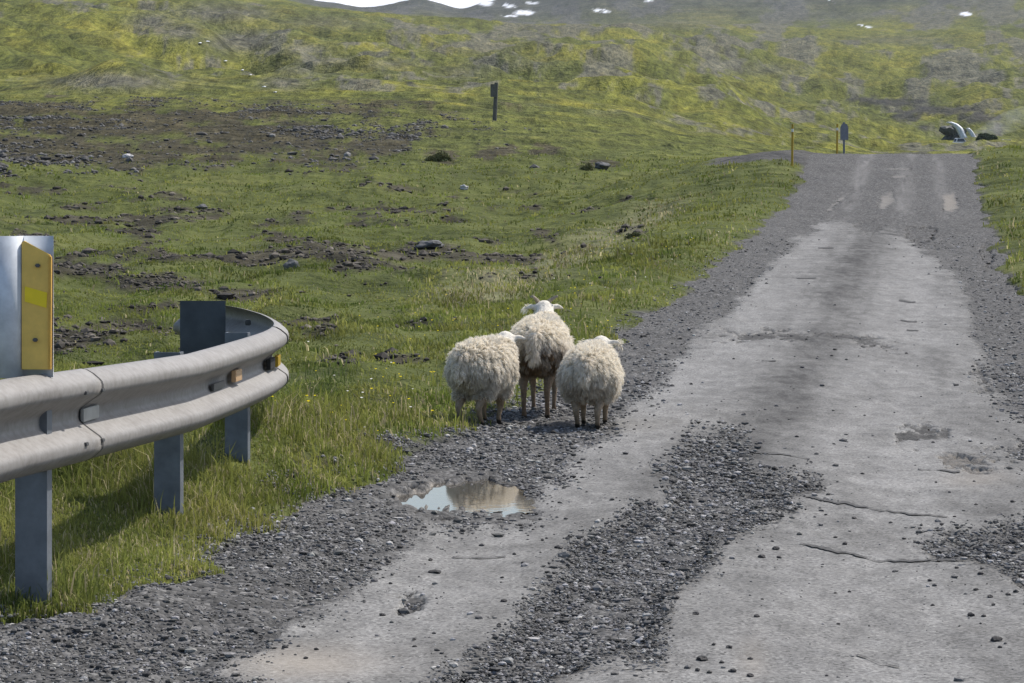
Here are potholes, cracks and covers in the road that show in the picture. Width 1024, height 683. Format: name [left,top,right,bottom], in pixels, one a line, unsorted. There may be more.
pothole [895,424,949,451]
pothole [396,593,427,616]
pothole [388,471,536,523]
pothole [938,452,996,475]
crack [800,543,960,562]
